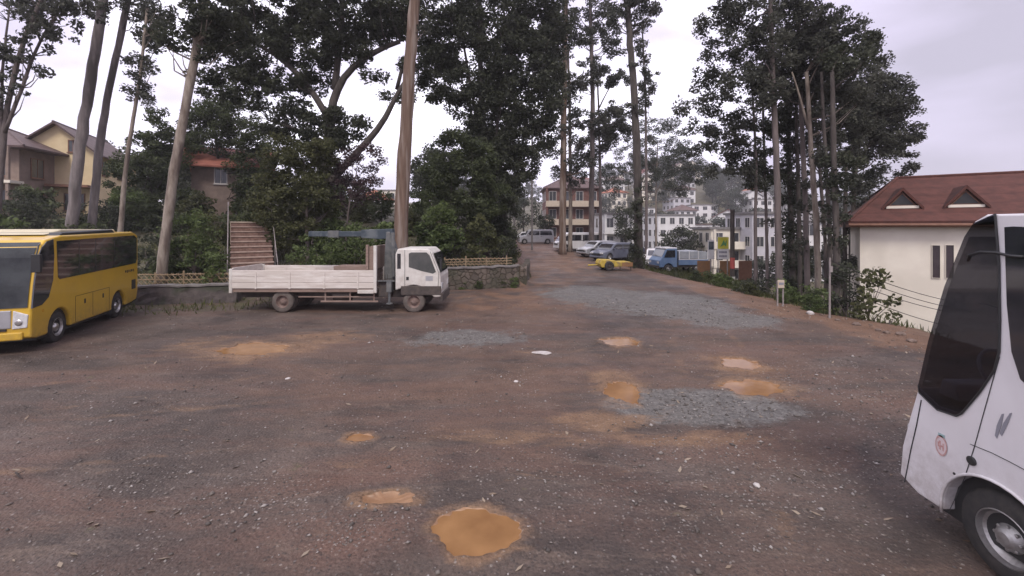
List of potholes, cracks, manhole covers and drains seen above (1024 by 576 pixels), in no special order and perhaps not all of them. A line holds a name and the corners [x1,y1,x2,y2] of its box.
pothole [711,355,774,373]
pothole [414,497,540,571]
pothole [592,335,647,348]
pothole [203,340,300,358]
pothole [593,377,650,409]
pothole [707,376,800,401]
pothole [334,428,386,448]
pothole [345,483,430,511]
